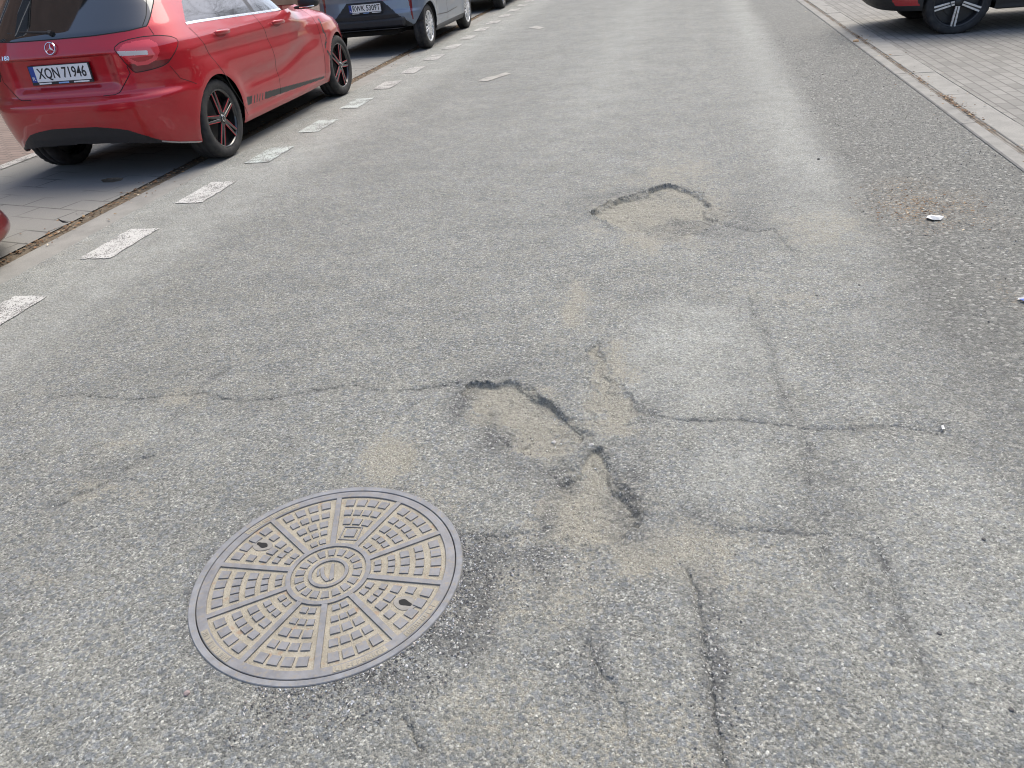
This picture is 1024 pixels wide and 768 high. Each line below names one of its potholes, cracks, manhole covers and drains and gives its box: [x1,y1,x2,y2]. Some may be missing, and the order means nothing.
crack [666,301,944,742]
pothole [591,183,723,237]
crack [49,373,461,419]
pothole [545,447,645,546]
crack [48,454,155,508]
manhole cover [188,487,463,688]
crack [582,636,629,736]
pothole [459,379,596,471]
